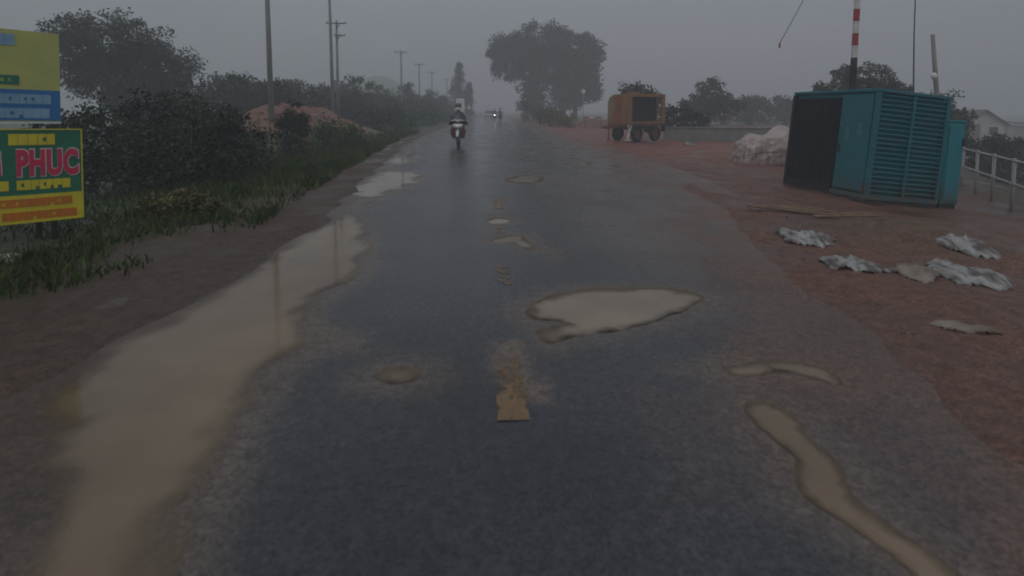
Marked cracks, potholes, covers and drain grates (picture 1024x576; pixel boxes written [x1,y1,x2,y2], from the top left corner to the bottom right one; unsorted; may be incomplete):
pothole [722,359,845,387]
pothole [525,287,704,345]
pothole [489,235,537,251]
pothole [372,366,423,385]
pothole [744,399,963,576]
pothole [505,175,545,183]
